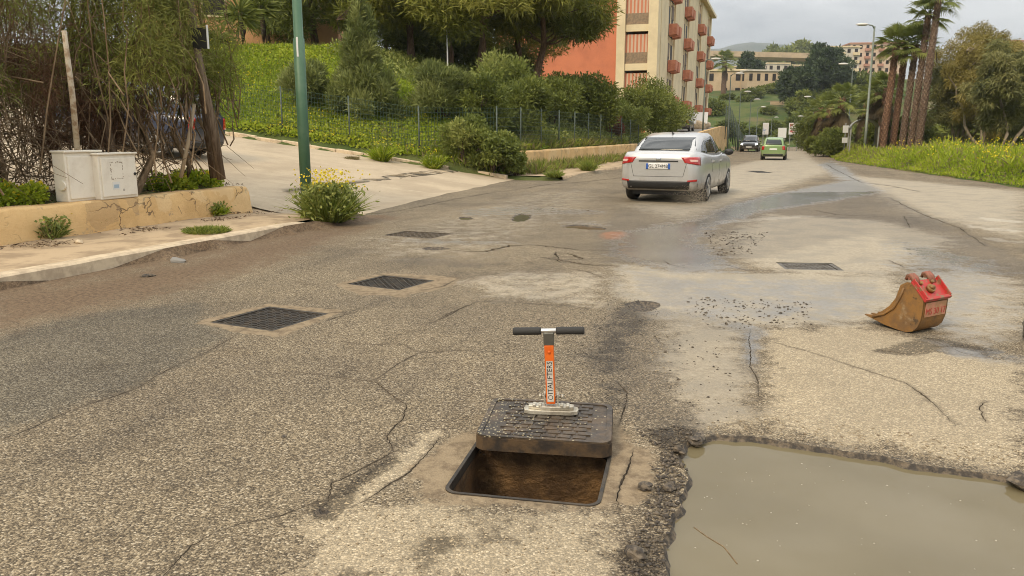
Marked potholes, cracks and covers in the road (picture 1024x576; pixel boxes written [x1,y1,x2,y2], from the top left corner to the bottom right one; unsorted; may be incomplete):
pothole [625,301,661,312]
crack [748,333,759,396]
crack [471,245,610,275]
crack [163,504,310,576]
manhole cover [476,398,613,458]
pothole [510,214,533,222]
pothole [663,434,1024,576]
manhole cover [445,442,612,507]
crack [779,343,955,424]
